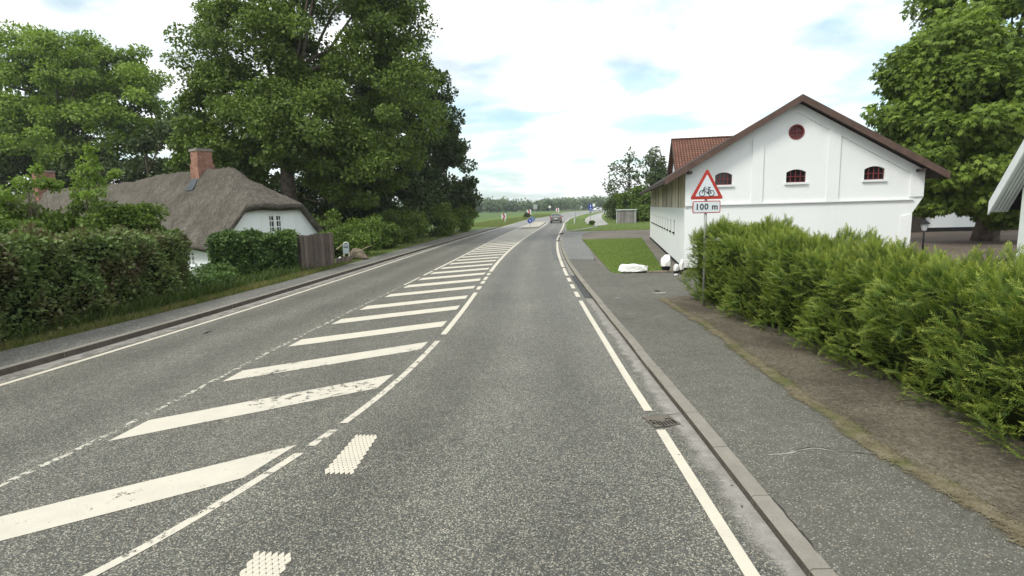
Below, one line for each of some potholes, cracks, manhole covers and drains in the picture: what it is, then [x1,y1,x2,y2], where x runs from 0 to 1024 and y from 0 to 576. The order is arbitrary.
drain grate [642,414,681,428]
crack [766,447,876,462]
